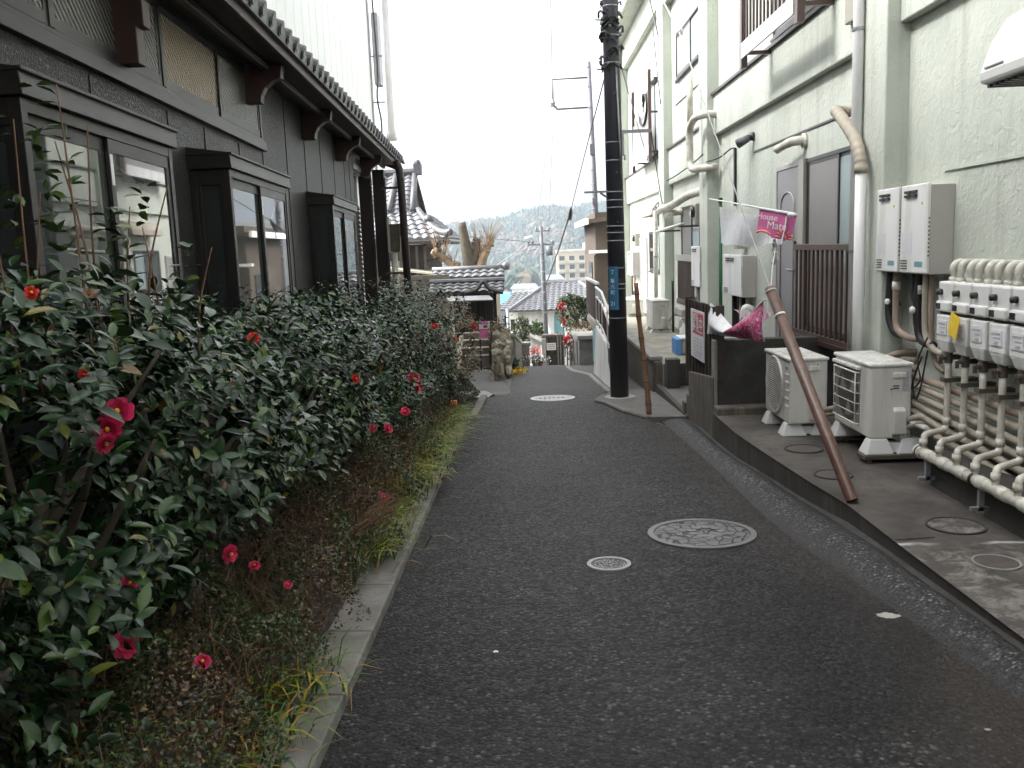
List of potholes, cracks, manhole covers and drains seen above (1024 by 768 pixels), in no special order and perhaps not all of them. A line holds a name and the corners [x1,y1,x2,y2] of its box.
manhole cover [648,518,757,550]
utility cover [813,469,854,480]
utility cover [784,444,824,454]
utility cover [971,554,1022,572]
utility cover [925,516,987,535]
